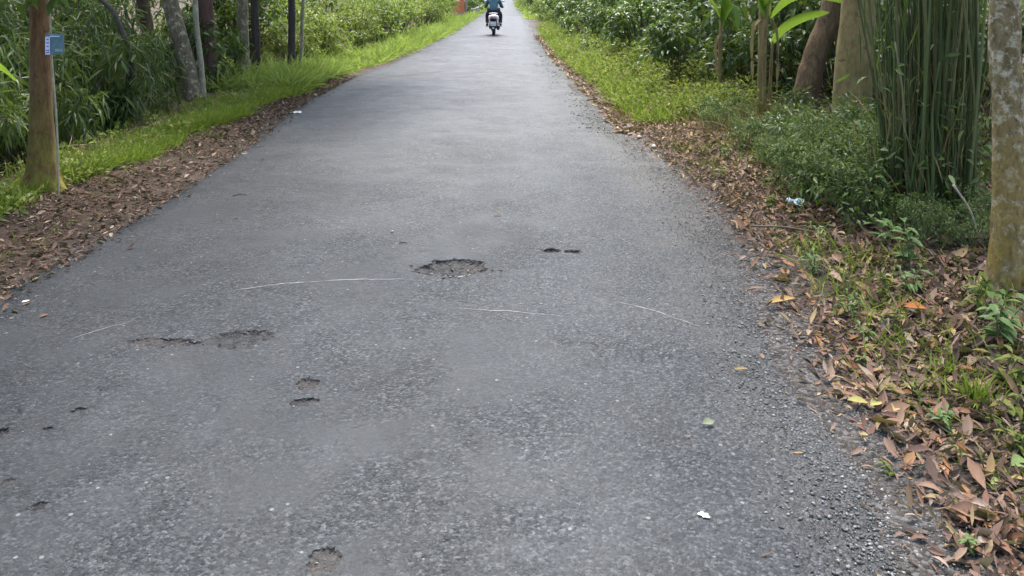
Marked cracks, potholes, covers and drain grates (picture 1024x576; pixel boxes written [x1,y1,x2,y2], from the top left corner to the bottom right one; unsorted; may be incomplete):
pothole [23,501,49,512]
pothole [116,336,204,348]
pothole [305,546,343,576]
pothole [295,376,320,390]
pothole [201,325,279,351]
pothole [404,257,502,279]
pothole [285,397,320,407]
